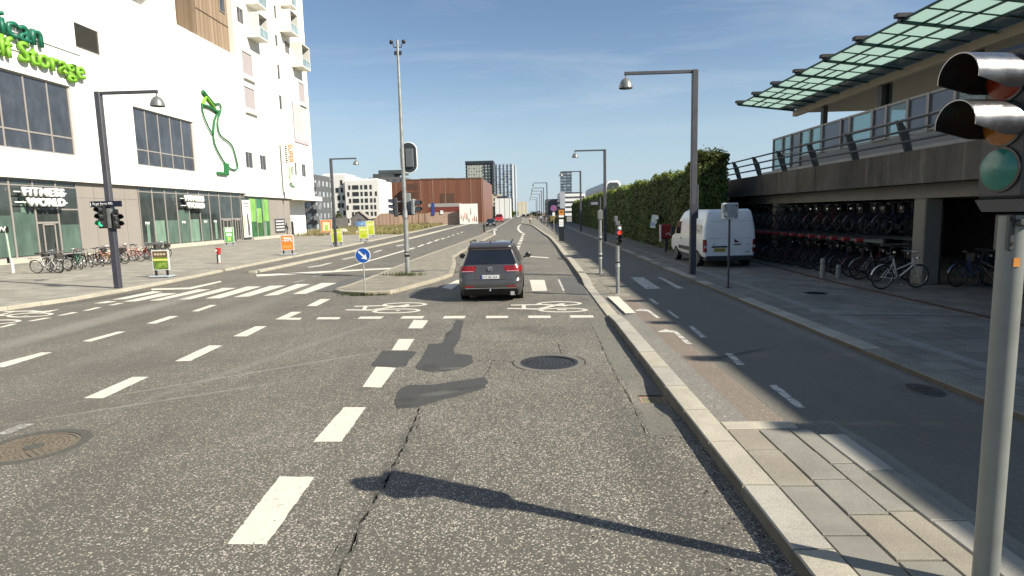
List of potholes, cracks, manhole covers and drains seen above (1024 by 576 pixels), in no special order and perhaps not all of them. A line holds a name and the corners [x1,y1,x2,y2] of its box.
crack [335,408,420,576]
crack [590,323,665,439]
manhole cover [512,354,586,372]
manhole cover [0,429,93,466]
